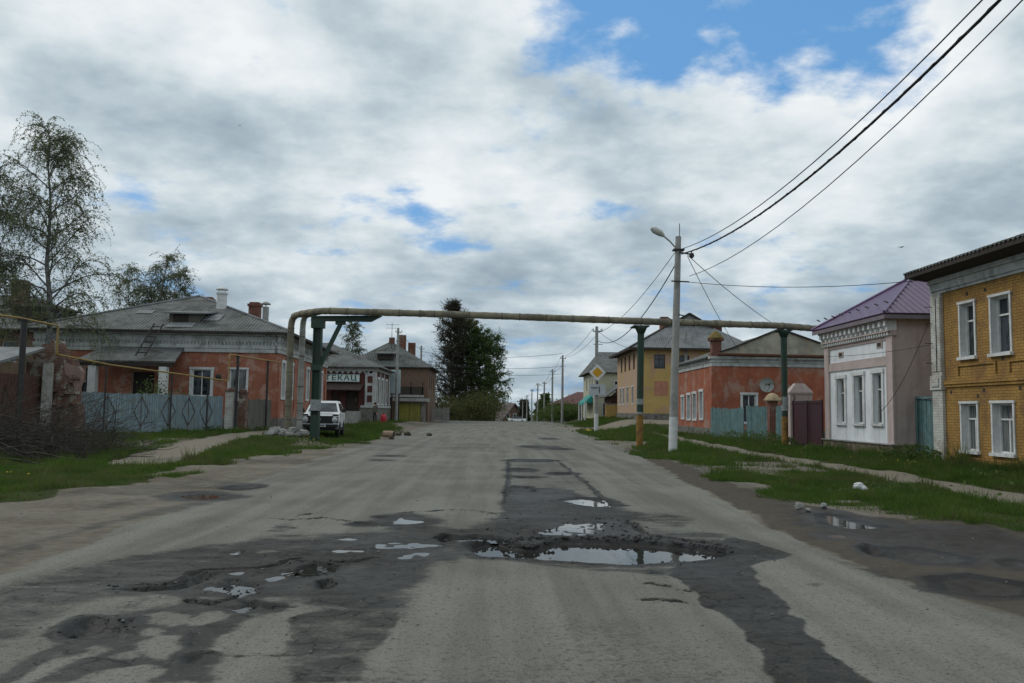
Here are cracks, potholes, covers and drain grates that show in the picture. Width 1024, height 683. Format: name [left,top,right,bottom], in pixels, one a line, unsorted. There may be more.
pothole [453,534,504,544]
pothole [356,541,448,549]
pothole [220,577,268,599]
pothole [535,522,610,536]
pothole [855,543,885,557]
pothole [114,570,220,592]
pothole [58,616,140,640]
pothole [237,599,283,611]
pothole [813,513,894,529]
pothole [461,537,739,565]
pothole [554,497,621,507]
pothole [384,514,434,525]
